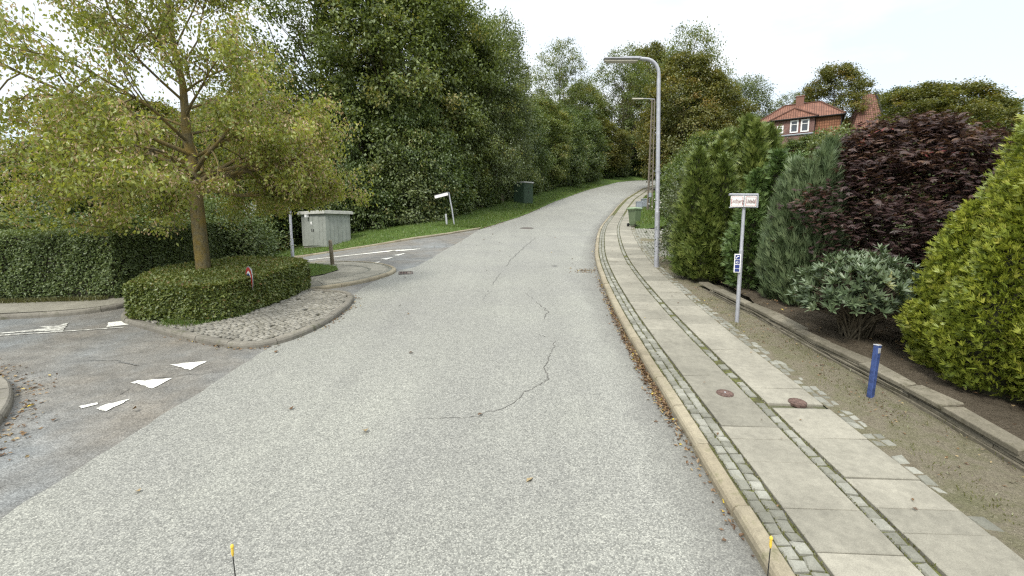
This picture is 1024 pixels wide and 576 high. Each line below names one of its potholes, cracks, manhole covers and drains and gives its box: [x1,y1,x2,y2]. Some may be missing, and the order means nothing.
manhole cover [788,398,807,408]
manhole cover [716,389,734,397]
crack [427,336,556,419]
